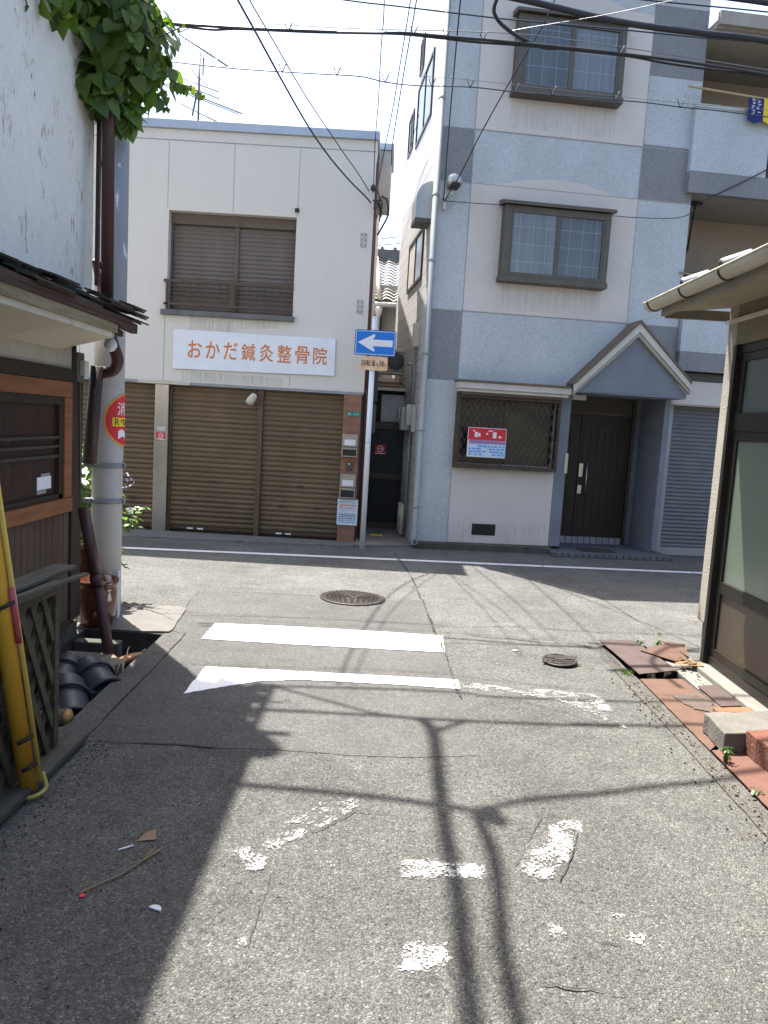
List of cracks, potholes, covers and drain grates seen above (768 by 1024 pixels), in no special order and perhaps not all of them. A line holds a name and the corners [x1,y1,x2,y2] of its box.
crack [494,979,604,992]
manhole cover [542,654,577,667]
manhole cover [320,590,385,606]
